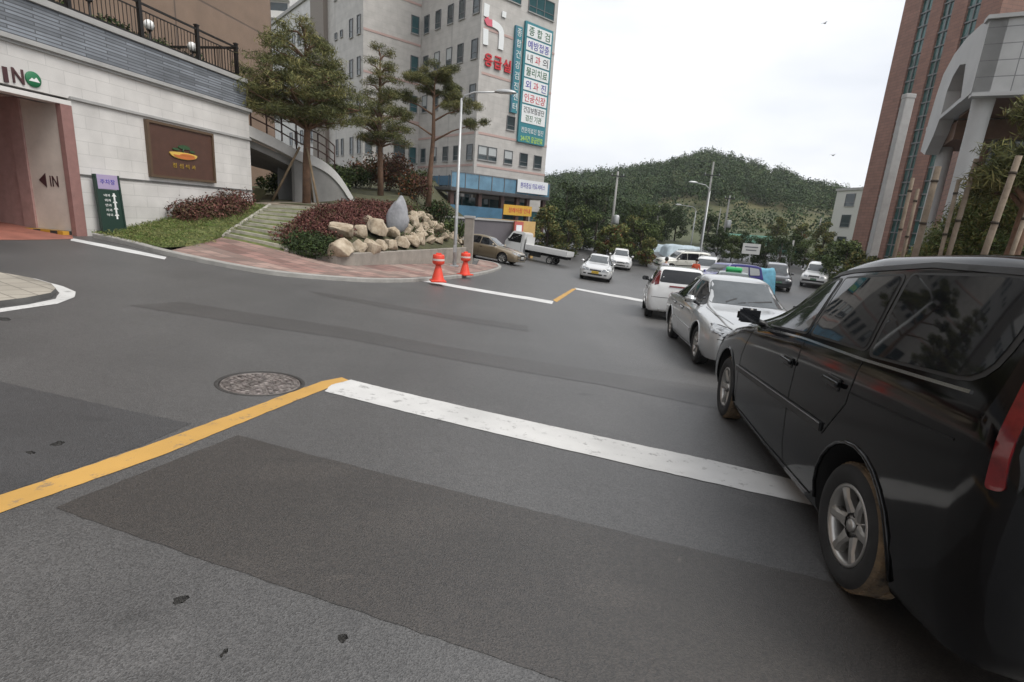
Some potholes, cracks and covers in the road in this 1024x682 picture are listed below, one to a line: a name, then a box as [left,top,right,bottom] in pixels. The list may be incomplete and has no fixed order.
pothole [172,595,190,605]
manhole cover [214,371,305,396]
